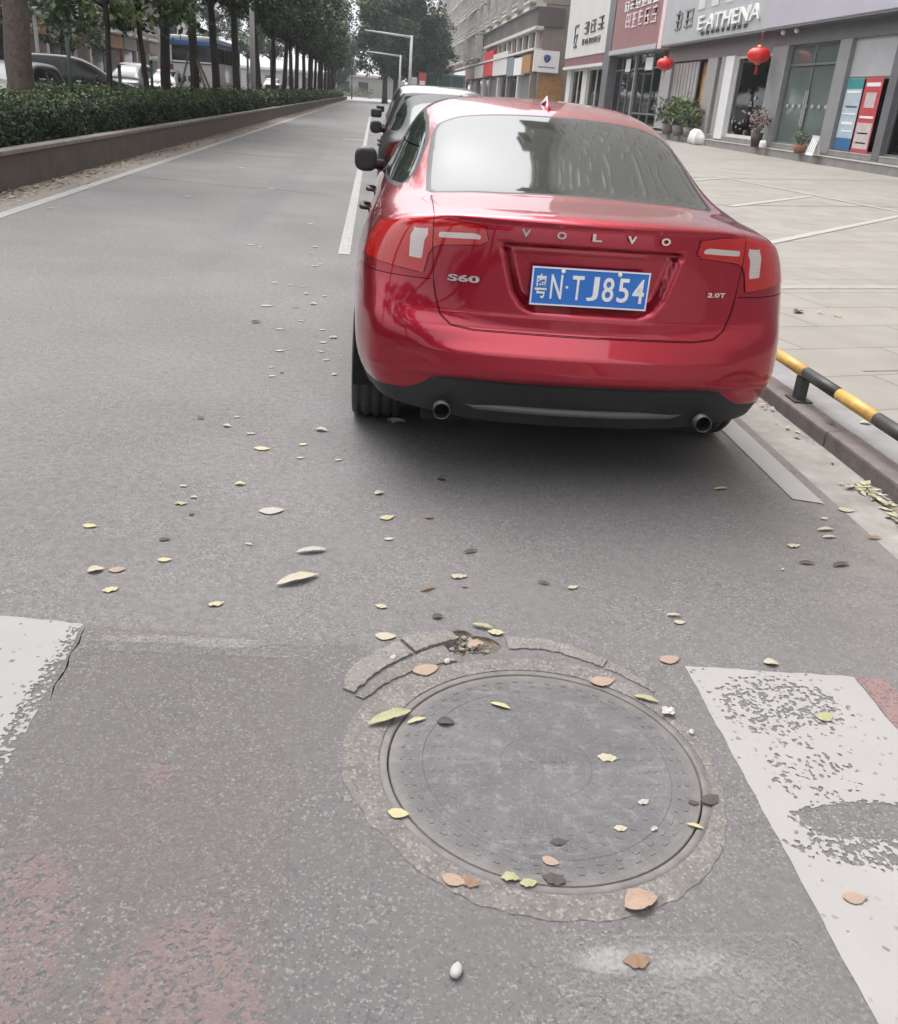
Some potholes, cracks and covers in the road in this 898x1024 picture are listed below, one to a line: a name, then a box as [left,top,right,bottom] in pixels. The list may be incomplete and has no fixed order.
pothole [447,630,501,656]
crack [50,628,85,698]
manhole cover [342,630,728,923]
